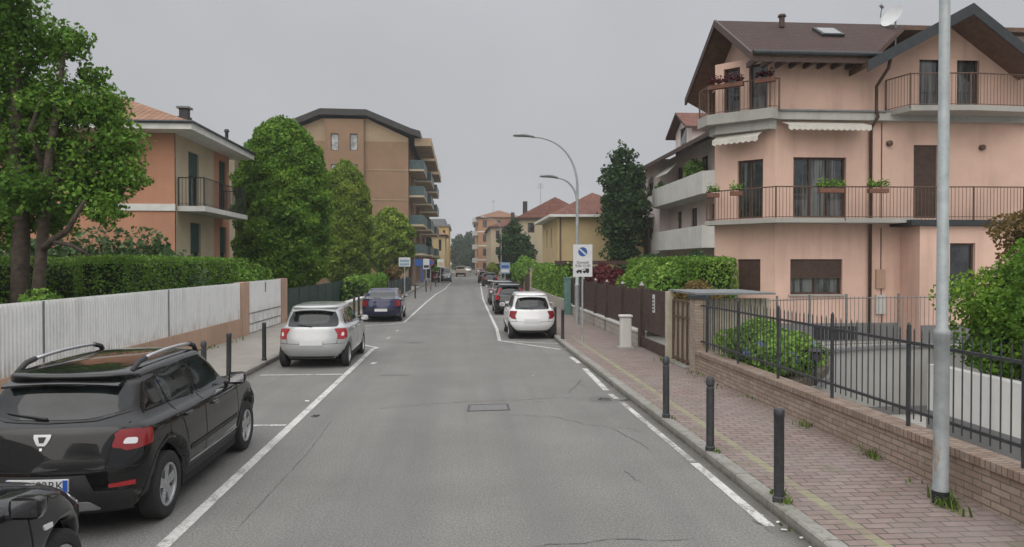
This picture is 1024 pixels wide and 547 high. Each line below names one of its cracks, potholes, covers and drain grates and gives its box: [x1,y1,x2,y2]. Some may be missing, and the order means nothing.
manhole cover [467,404,510,412]
crack [367,380,646,447]
crack [532,538,686,547]
